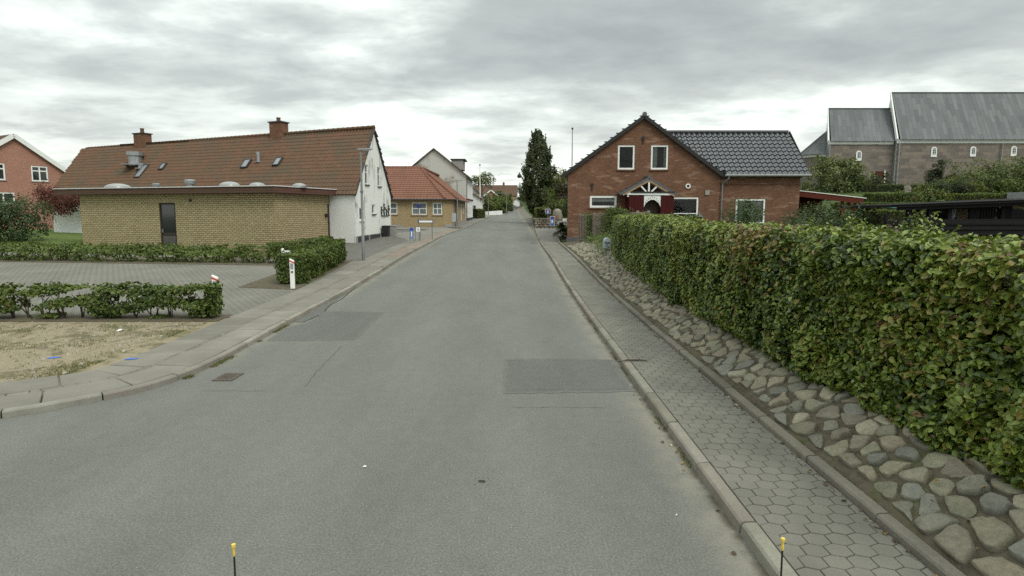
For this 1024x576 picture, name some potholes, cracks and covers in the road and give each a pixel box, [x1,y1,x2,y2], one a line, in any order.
drain grate [212,373,244,381]
